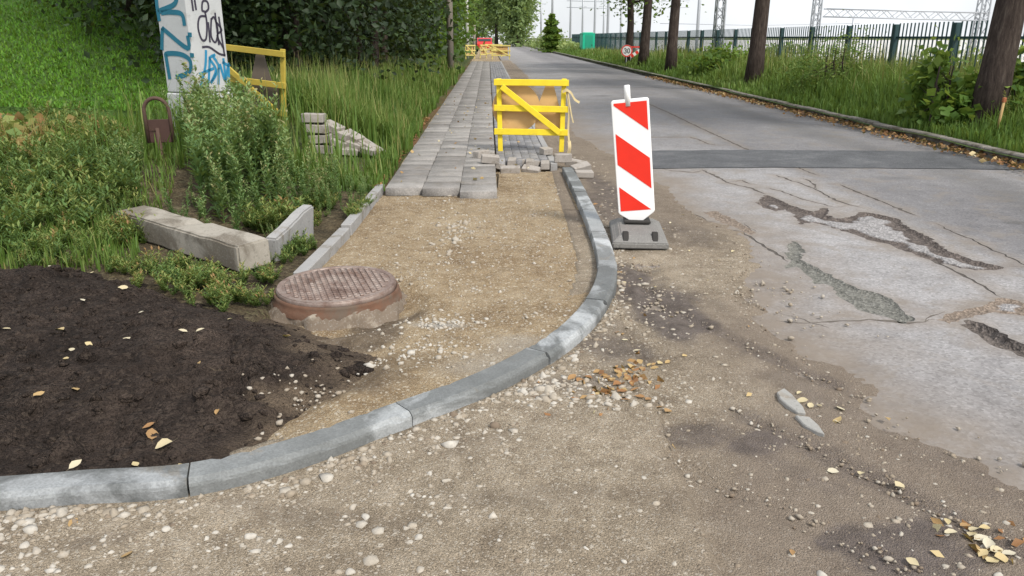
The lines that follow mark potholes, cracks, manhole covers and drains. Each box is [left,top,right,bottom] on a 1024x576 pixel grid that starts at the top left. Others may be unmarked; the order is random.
pothole [784,241,915,324]
pothole [961,319,1024,357]
crack [695,214,788,262]
manhole cover [269,266,408,331]
pothole [755,195,1004,270]
crack [931,223,1024,298]
crack [665,168,917,216]
